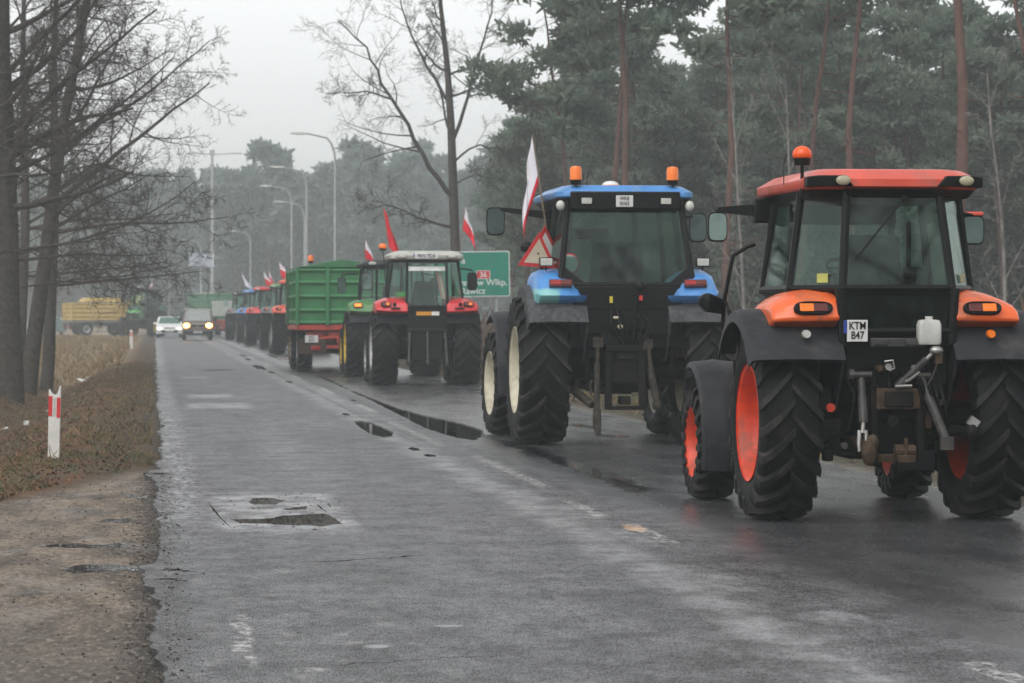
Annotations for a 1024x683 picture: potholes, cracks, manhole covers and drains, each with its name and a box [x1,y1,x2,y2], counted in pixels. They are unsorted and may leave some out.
pothole [231,514,342,527]
pothole [350,391,485,440]
